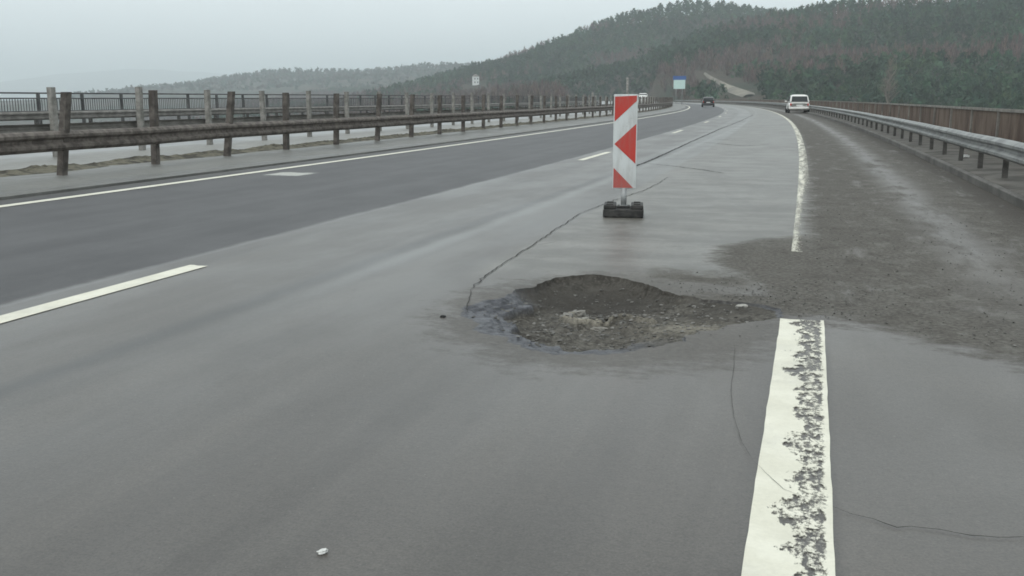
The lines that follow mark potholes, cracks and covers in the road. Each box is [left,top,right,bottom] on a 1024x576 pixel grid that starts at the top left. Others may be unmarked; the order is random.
crack [466,163,721,312]
crack [731,353,1022,538]
pothole [460,274,784,355]
